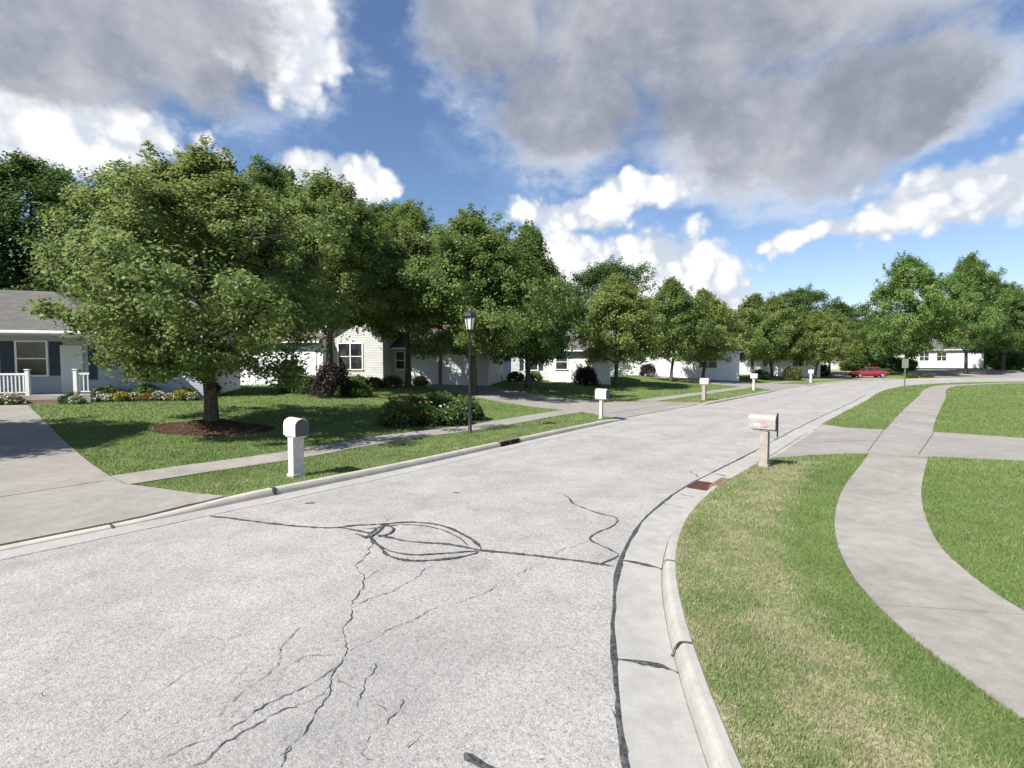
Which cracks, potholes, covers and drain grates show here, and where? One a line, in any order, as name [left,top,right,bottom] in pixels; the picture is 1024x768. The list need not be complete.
drain grate [687,478,730,491]
drain grate [495,437,520,447]
crack [161,543,581,767]
